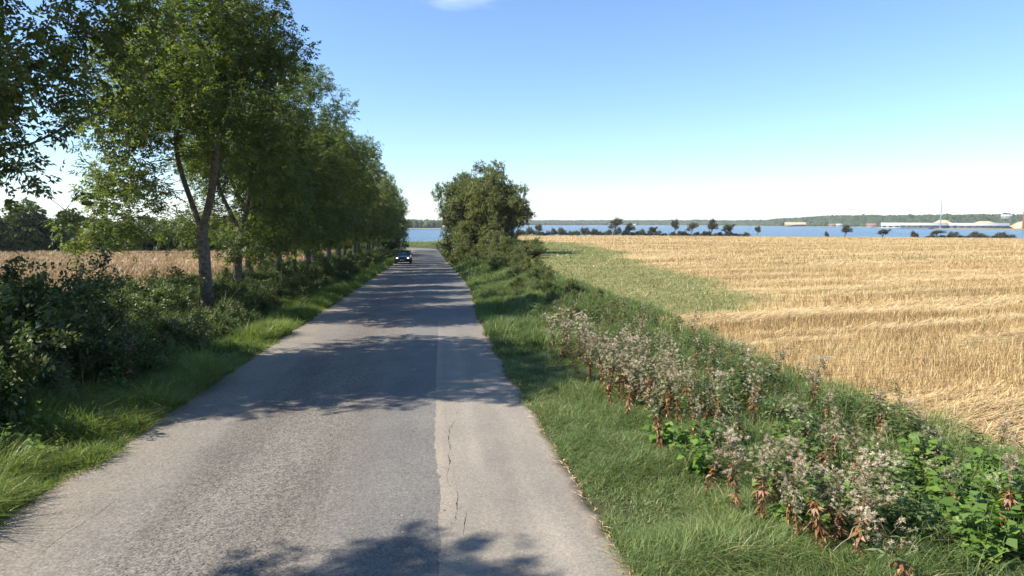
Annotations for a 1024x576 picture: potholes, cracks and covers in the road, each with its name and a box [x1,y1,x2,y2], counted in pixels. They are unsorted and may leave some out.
crack [446,421,467,535]
